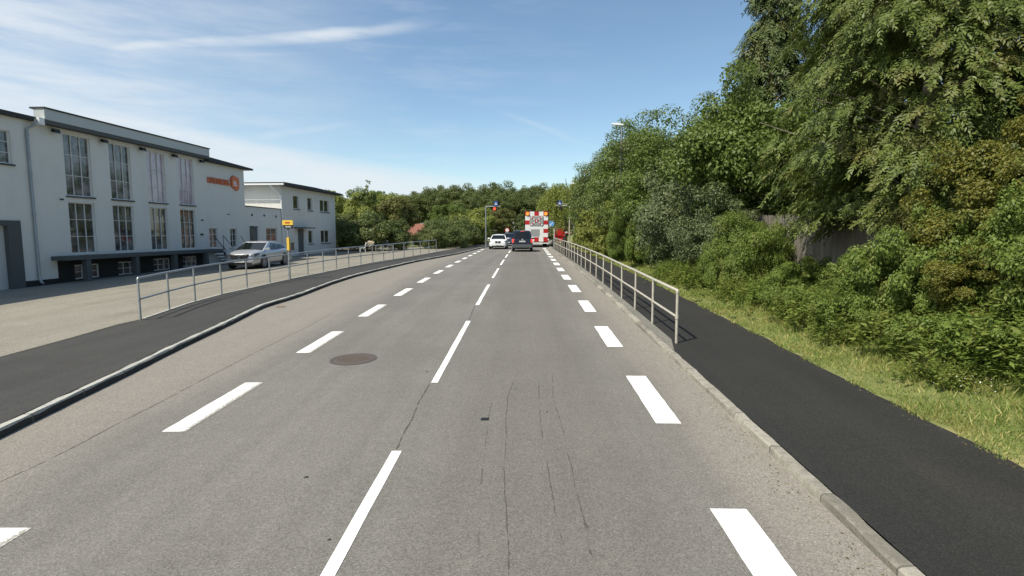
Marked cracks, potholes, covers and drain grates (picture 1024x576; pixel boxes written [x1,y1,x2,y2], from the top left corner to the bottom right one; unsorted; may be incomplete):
crack [396,384,430,450]
manhole cover [329,353,377,365]
crack [478,381,514,575]
crack [538,373,600,570]
